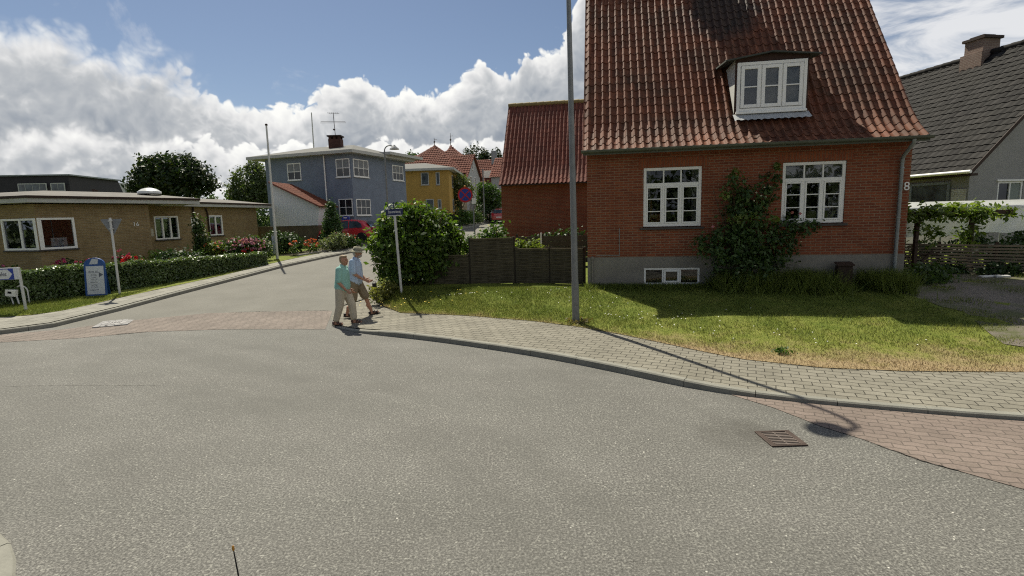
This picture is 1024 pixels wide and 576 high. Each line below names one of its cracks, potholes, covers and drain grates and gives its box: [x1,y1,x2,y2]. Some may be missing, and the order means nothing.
drain grate [754,430,808,447]
